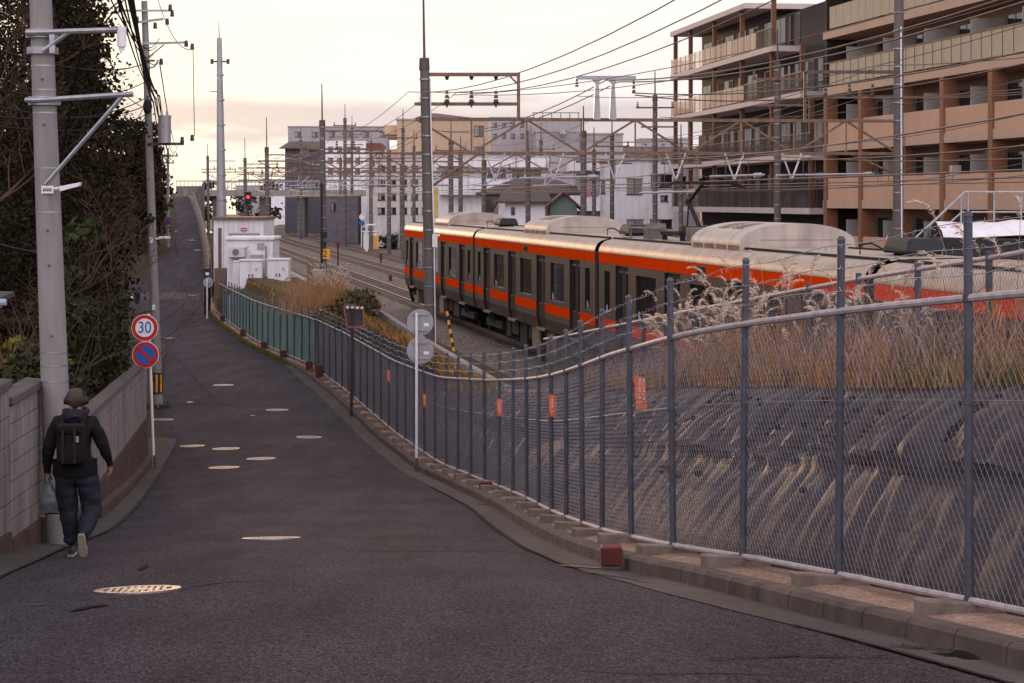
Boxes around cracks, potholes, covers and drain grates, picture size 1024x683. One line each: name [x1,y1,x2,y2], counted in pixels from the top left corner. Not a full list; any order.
manhole cover [94,585,181,594]
